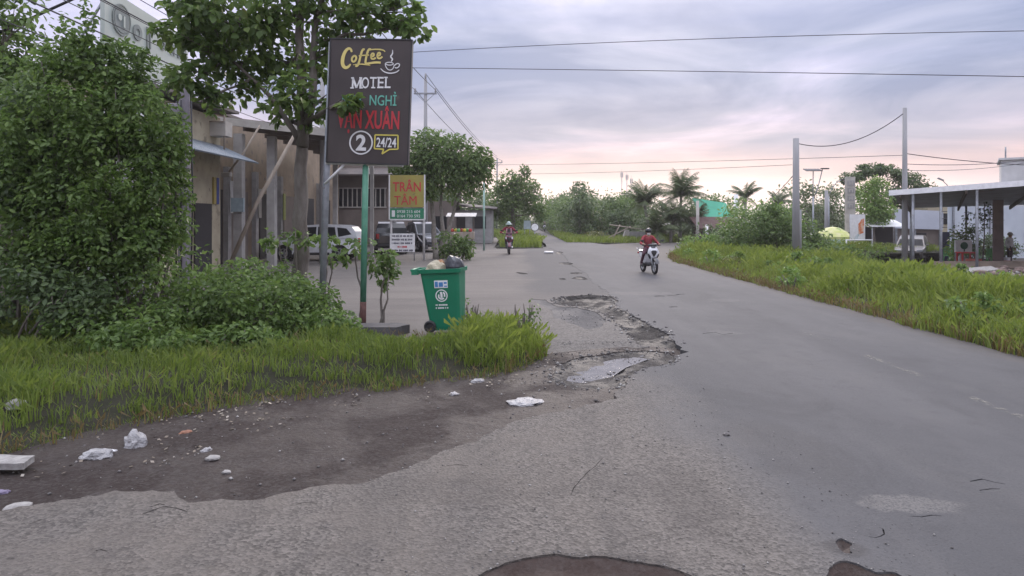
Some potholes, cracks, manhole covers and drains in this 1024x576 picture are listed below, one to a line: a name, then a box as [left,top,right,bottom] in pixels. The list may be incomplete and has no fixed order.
pothole [552,351,675,389]
pothole [828,563,897,576]
pothole [555,295,676,349]
pothole [836,540,852,553]
pothole [482,556,687,576]
